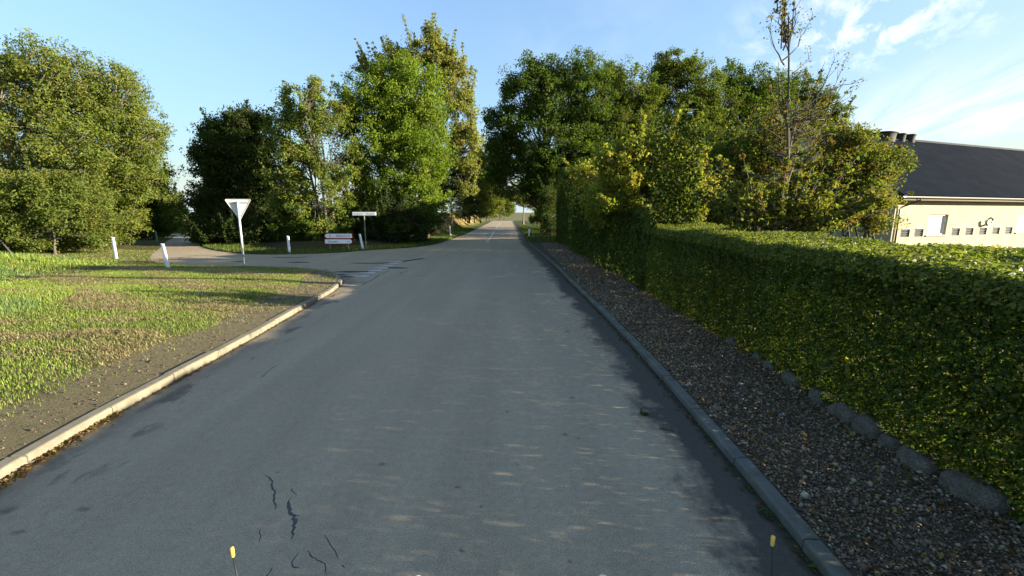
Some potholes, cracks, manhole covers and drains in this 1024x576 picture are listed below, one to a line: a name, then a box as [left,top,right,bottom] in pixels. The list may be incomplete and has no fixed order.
crack [259,472,346,573]
